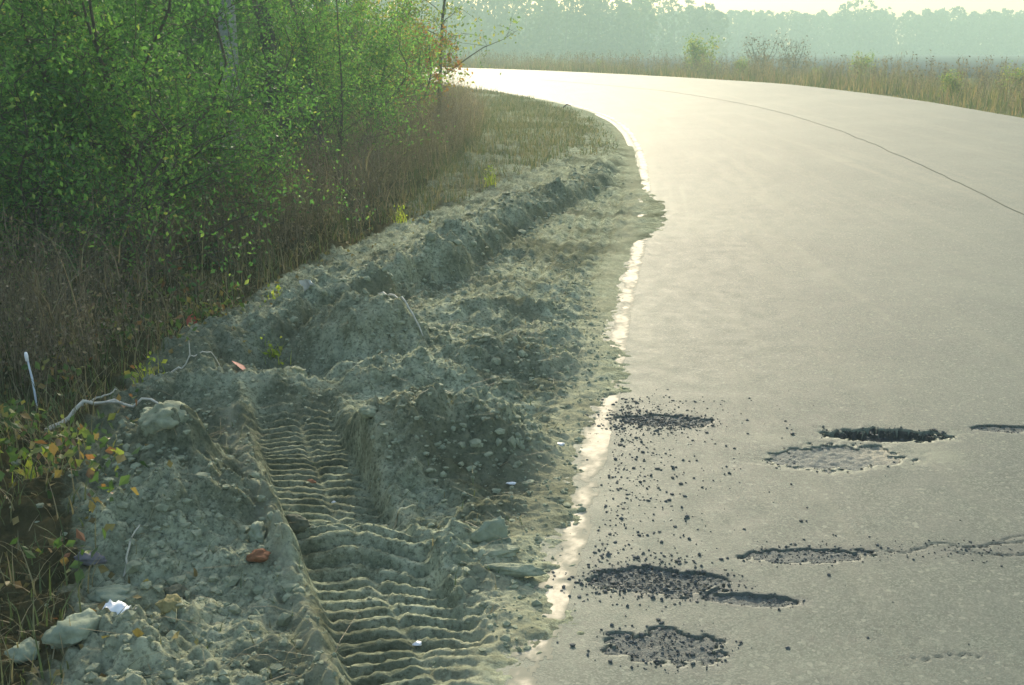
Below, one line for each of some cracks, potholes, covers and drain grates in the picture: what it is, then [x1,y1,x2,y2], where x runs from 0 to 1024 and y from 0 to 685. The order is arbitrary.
pothole [588,568,798,608]
pothole [615,415,712,428]
pothole [738,550,871,564]
